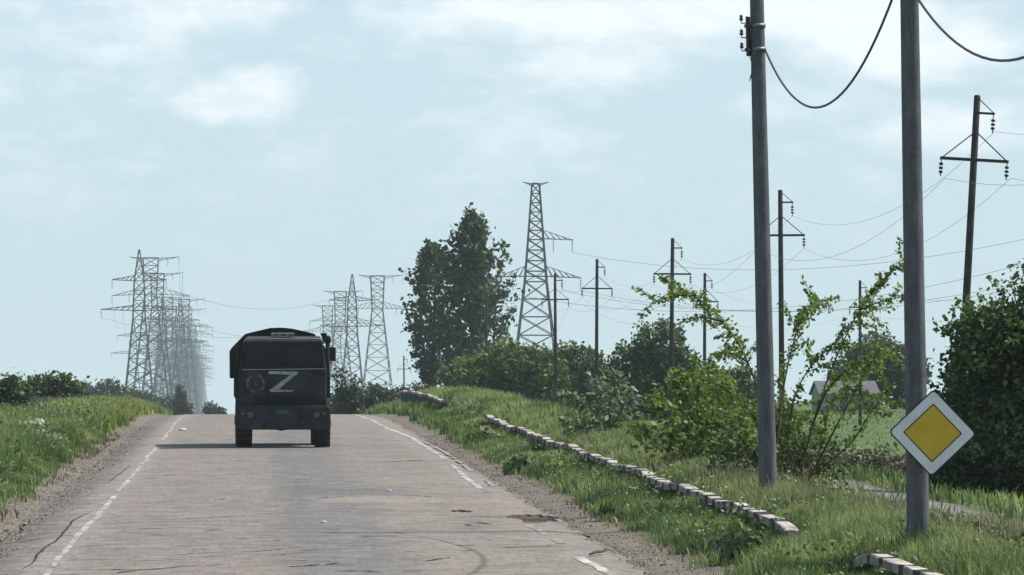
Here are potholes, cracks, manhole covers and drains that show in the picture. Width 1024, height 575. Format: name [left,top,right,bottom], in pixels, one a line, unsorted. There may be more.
pothole [504,514,559,523]
crack [407,545,474,562]
